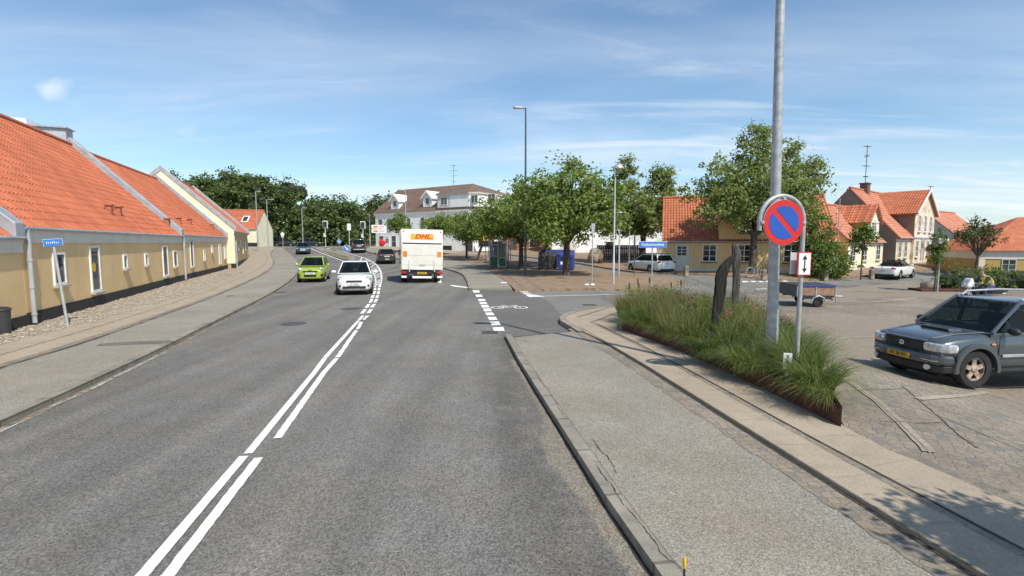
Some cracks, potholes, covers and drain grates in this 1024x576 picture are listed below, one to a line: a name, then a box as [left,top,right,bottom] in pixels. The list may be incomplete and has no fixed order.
crack [594,441,683,569]
